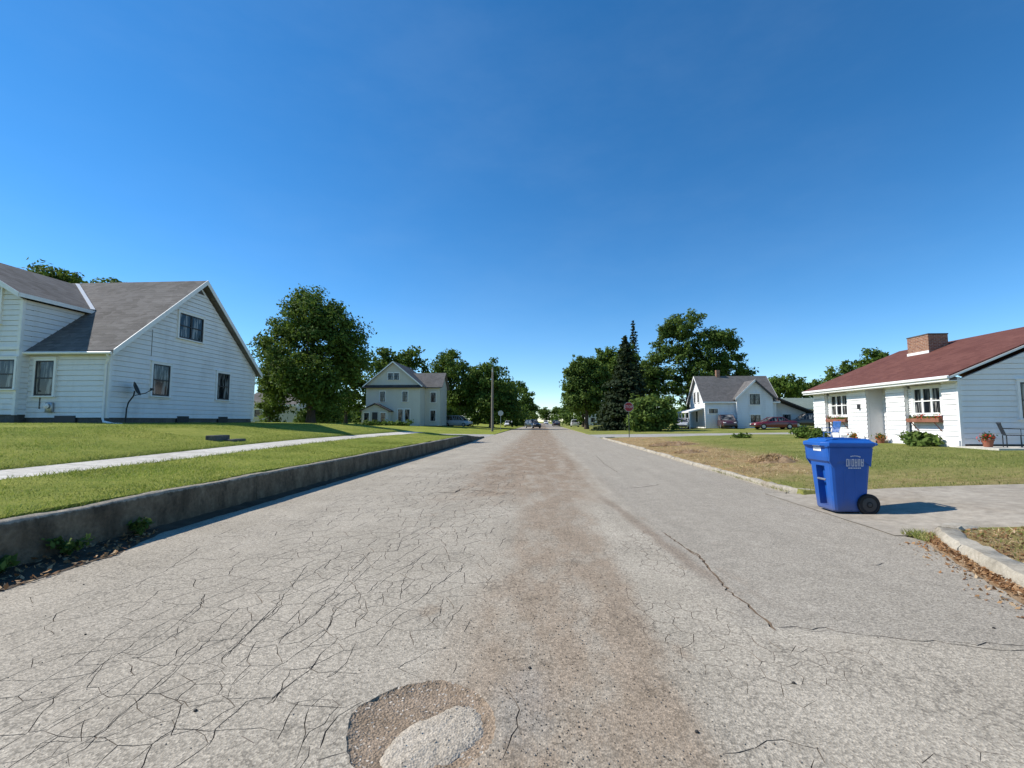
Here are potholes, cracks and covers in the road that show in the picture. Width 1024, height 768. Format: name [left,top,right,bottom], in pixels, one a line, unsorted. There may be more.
pothole [346,680,496,768]
crack [0,461,523,768]
crack [619,532,1024,768]
